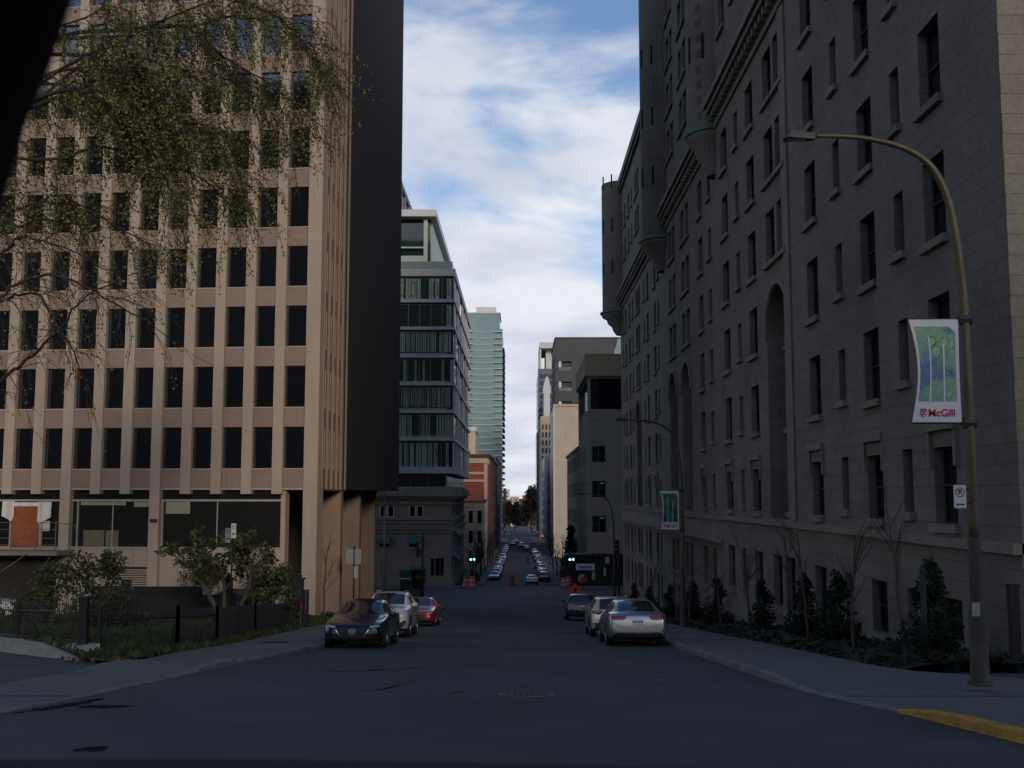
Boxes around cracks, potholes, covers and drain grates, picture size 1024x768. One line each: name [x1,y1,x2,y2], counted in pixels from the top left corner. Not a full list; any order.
crack [334,667,428,692]
